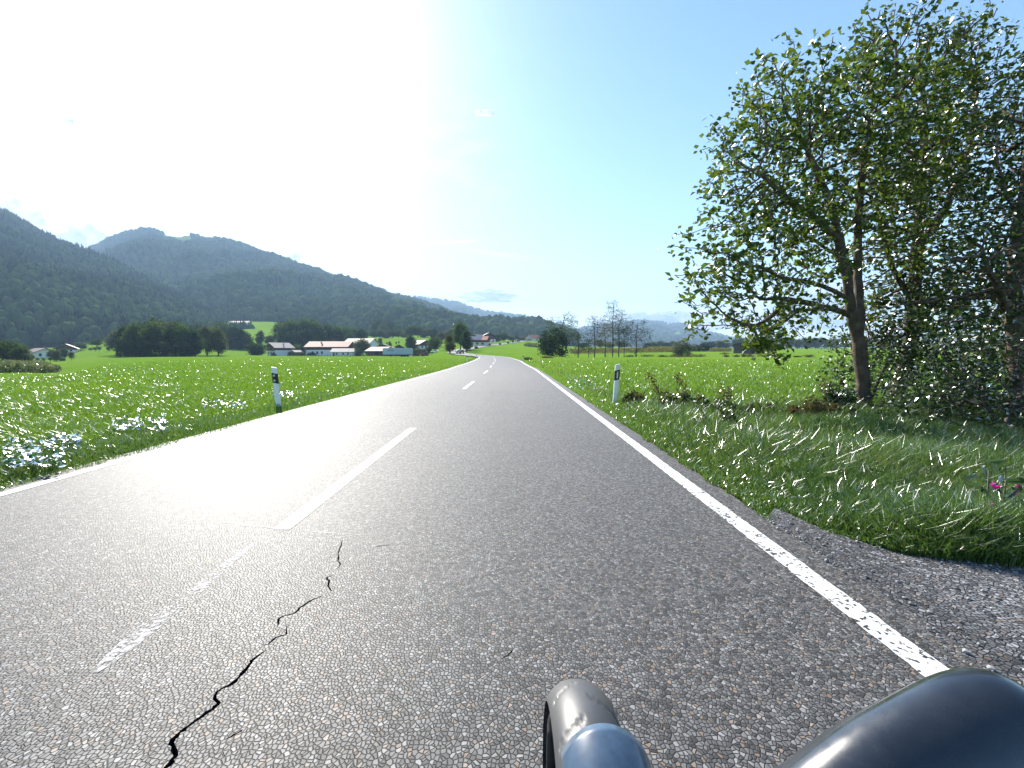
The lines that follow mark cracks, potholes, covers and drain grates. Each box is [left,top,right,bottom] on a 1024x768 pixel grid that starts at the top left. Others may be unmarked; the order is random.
crack [163,540,343,768]
